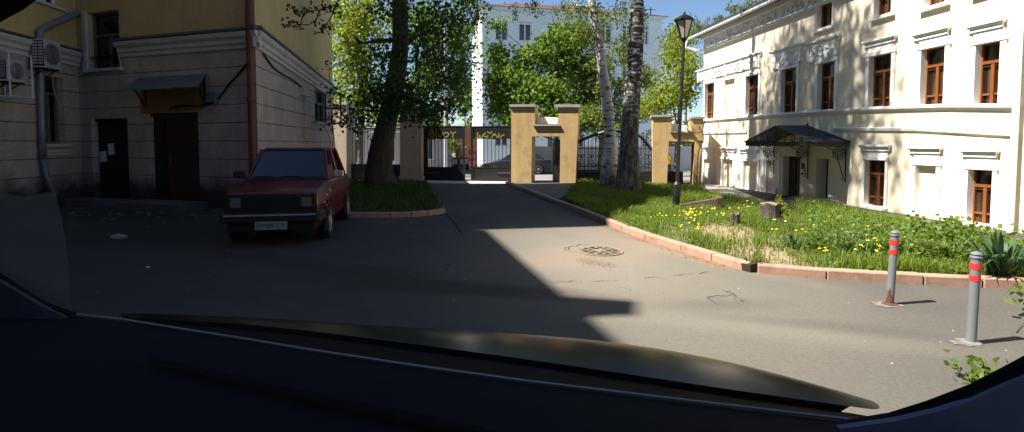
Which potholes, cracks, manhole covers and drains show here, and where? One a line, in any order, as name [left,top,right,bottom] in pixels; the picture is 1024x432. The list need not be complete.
crack [546,271,712,290]
manhole cover [577,246,624,256]
